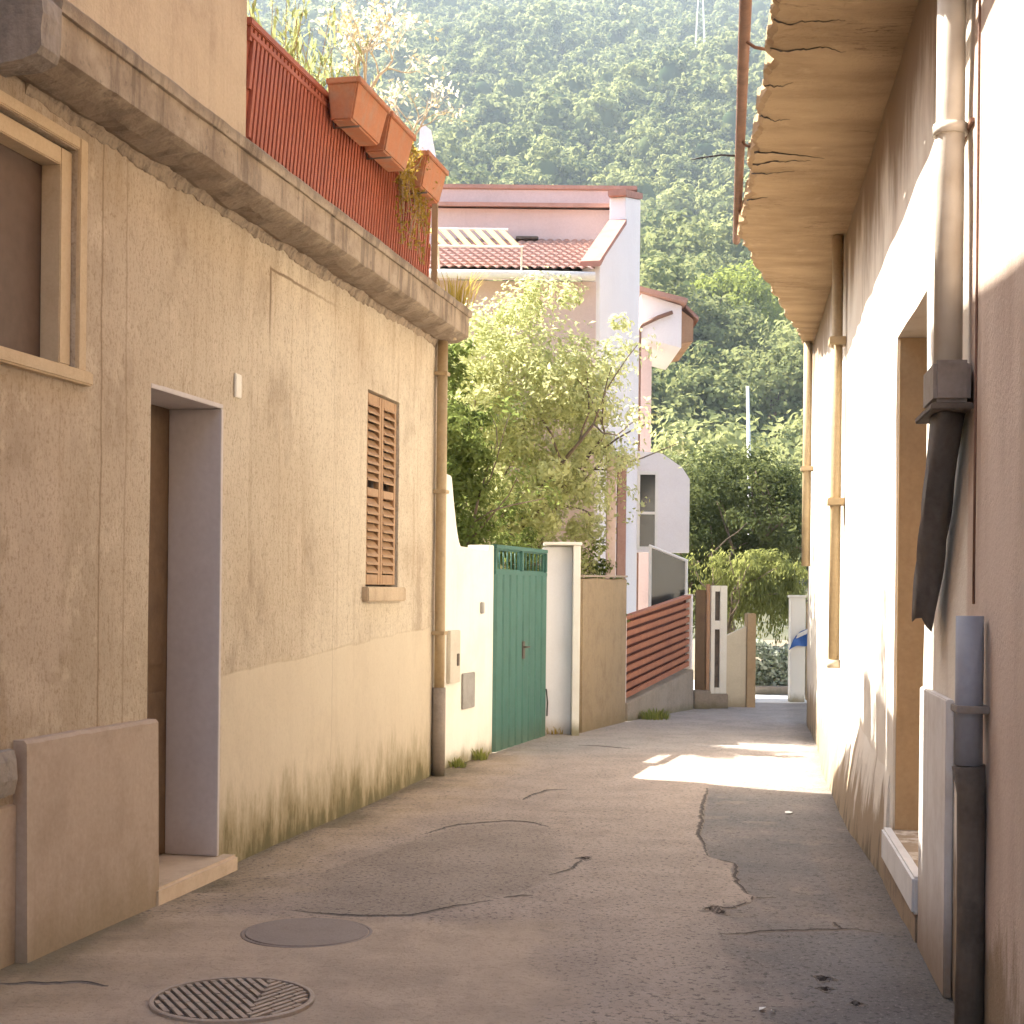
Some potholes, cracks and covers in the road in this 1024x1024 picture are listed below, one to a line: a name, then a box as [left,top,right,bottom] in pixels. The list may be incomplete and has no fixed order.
crack [522,789,565,800]
crack [549,860,583,875]
crack [294,895,533,917]
crack [424,820,548,834]
manhole cover [240,918,373,948]
crack [695,788,881,935]
pothole [699,905,731,916]
